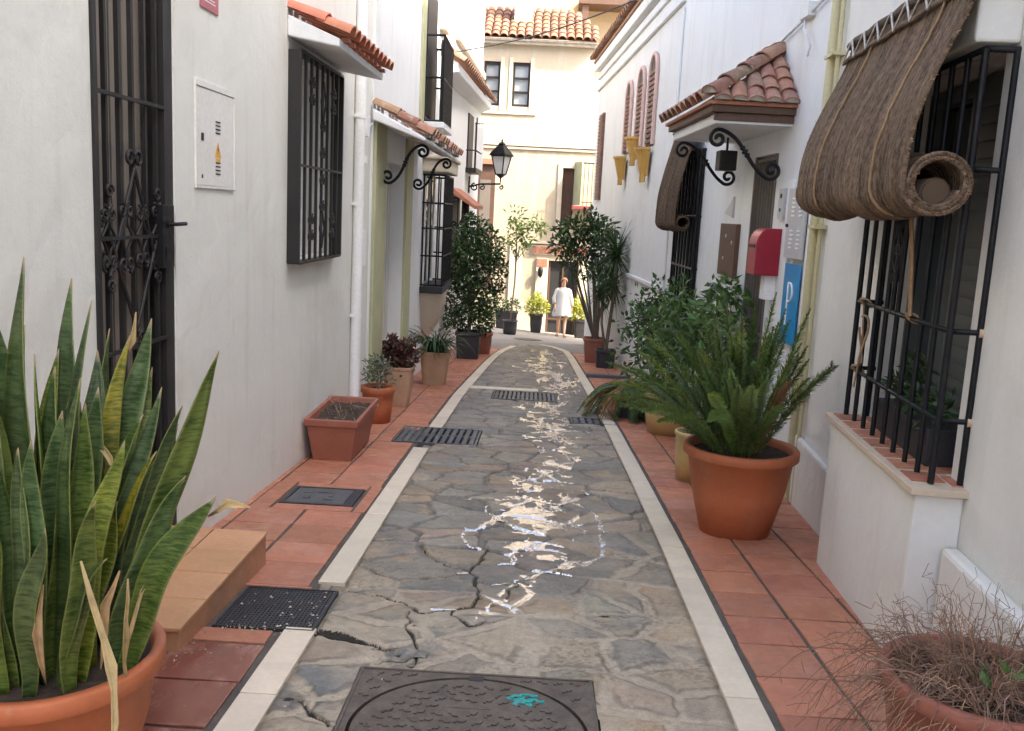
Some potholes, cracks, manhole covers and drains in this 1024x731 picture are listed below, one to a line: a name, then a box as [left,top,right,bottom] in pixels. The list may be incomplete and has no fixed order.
drain grate [491,390,558,403]
drain grate [212,585,339,632]
crack [314,546,520,668]
manhole cover [333,666,599,731]
drain grate [392,426,482,447]
manhole cover [278,486,365,507]
drain grate [569,417,618,426]
